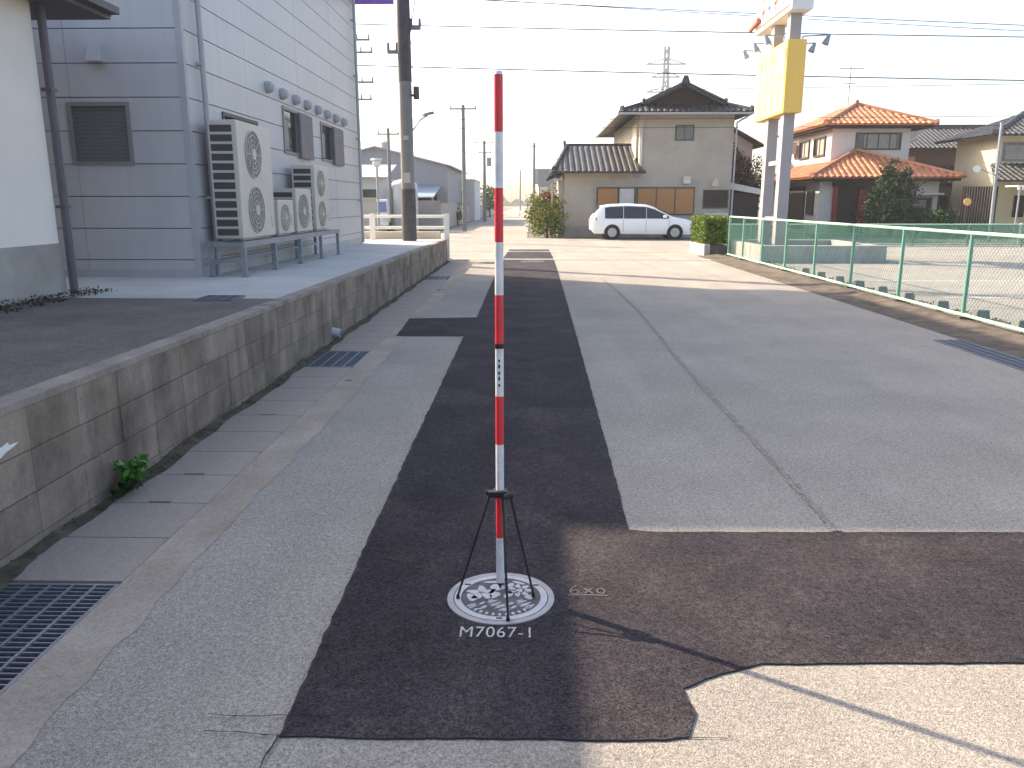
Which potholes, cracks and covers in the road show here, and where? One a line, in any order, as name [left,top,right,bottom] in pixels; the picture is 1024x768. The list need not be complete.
drain grate [934,340,1024,371]
manhole cover [447,573,554,625]
drain grate [305,351,371,368]
crack [204,713,334,768]
drain grate [0,583,120,695]
